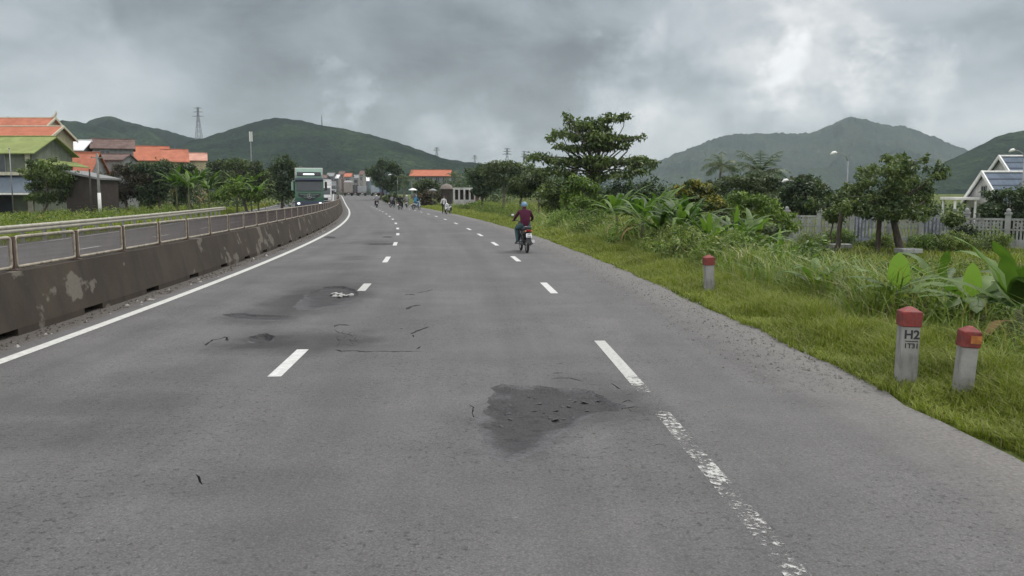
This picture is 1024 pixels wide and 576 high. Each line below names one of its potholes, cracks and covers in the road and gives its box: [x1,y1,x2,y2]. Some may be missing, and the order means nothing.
pothole [246,333,275,343]
pothole [292,286,359,310]
crack [334,324,428,352]
